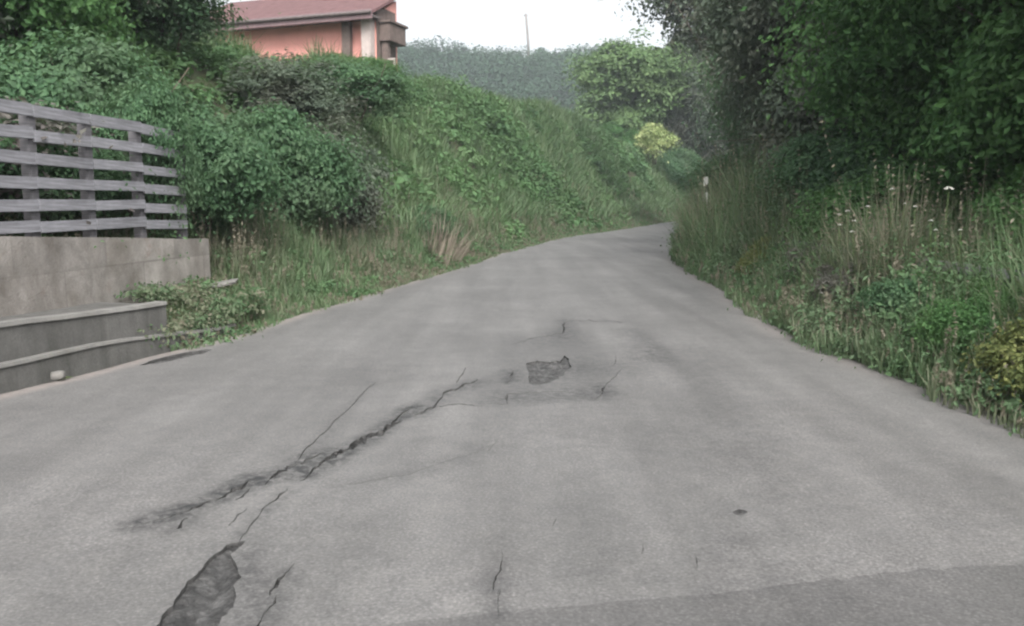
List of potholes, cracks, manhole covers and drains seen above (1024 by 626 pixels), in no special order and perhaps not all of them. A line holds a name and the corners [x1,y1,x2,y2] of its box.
pothole [157,540,245,626]
crack [488,319,625,405]
crack [139,369,496,542]
crack [256,563,295,626]
pothole [526,355,571,385]
crack [493,550,503,613]
